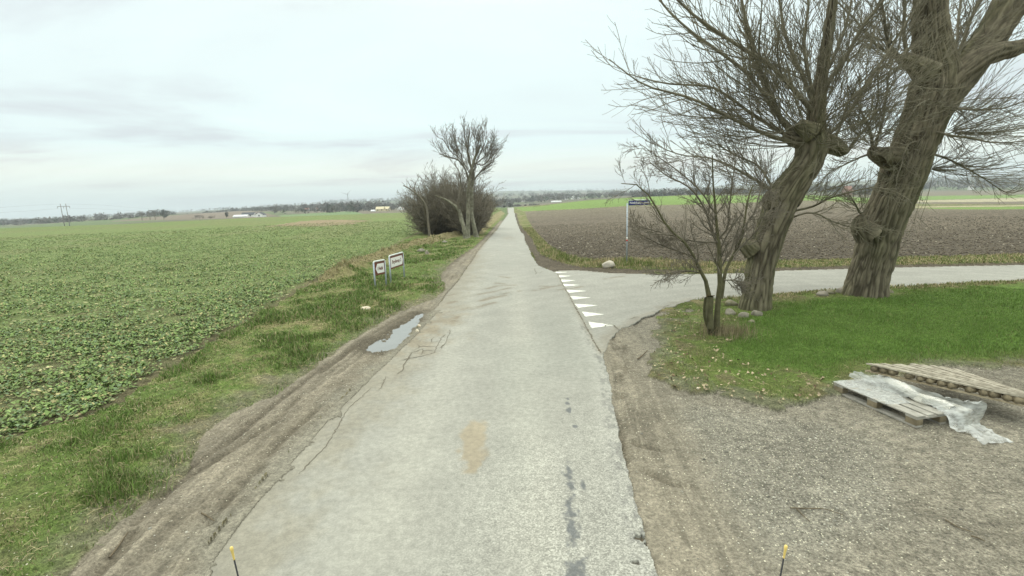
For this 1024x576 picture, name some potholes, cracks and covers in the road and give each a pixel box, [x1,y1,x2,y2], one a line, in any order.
crack [299,331,451,473]
